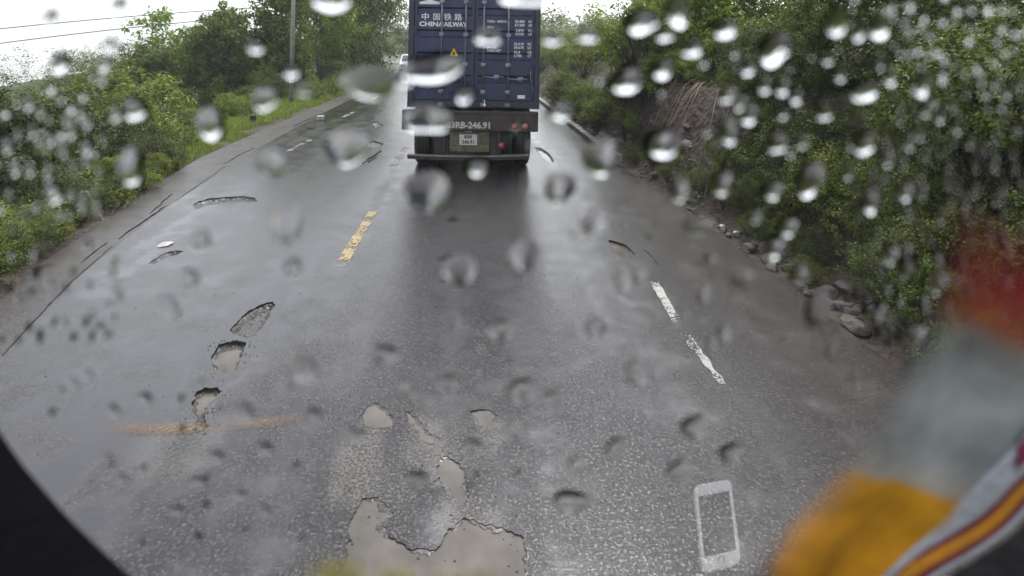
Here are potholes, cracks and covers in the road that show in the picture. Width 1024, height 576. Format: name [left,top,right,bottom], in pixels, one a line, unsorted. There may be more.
pothole [230,302,275,338]
pothole [211,340,246,376]
pothole [434,456,470,504]
pothole [534,147,554,162]
pothole [191,387,221,433]
pothole [470,409,498,426]
pothole [346,497,527,576]
pothole [608,240,635,258]
pothole [407,411,440,445]
crack [2,148,254,357]
pothole [193,196,257,210]
pothole [359,402,395,429]
